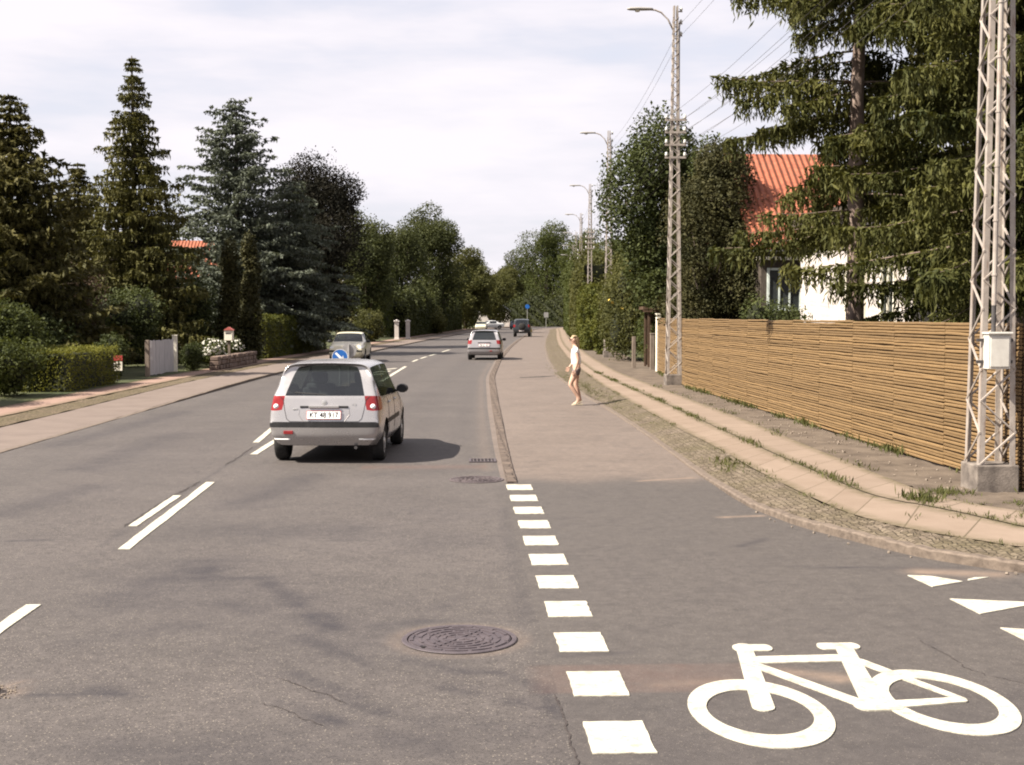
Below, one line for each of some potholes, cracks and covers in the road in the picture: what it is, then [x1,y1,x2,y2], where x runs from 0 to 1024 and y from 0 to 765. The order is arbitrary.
pothole [0,685,17,699]
manhole cover [401,625,517,654]
